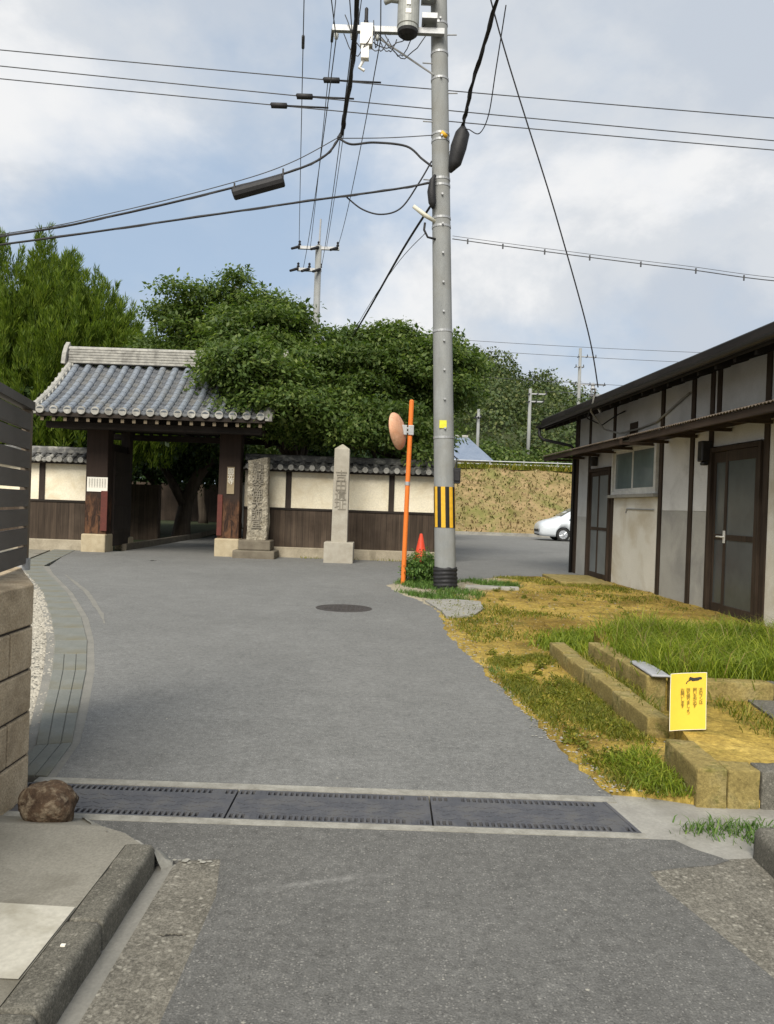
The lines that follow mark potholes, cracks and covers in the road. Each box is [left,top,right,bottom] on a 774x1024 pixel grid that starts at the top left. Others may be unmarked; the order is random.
manhole cover [316,604,372,612]
